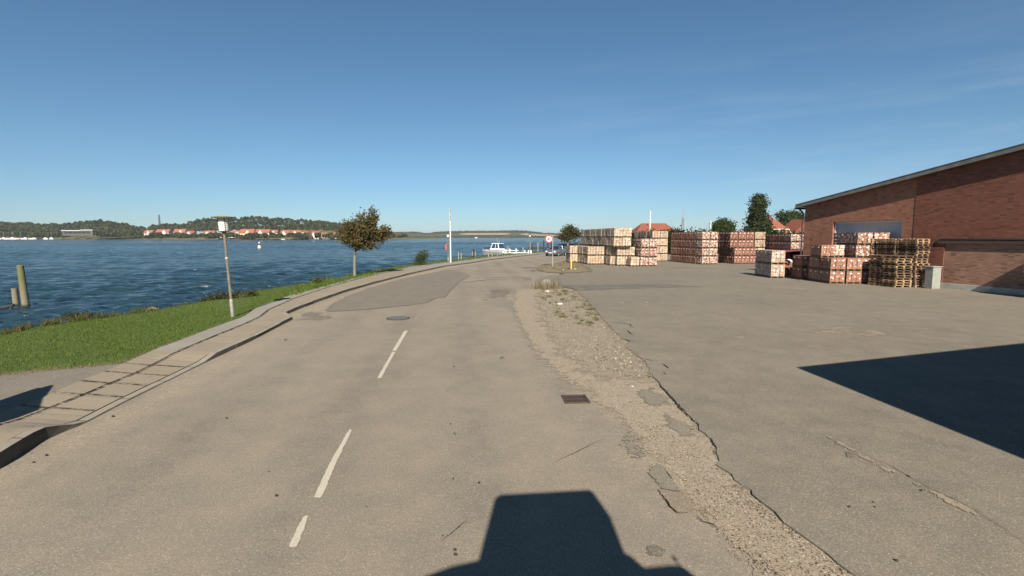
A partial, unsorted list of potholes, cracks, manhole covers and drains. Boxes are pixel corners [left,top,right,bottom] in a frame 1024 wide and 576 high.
drain grate [561,394,591,404]
crack [643,358,717,456]
